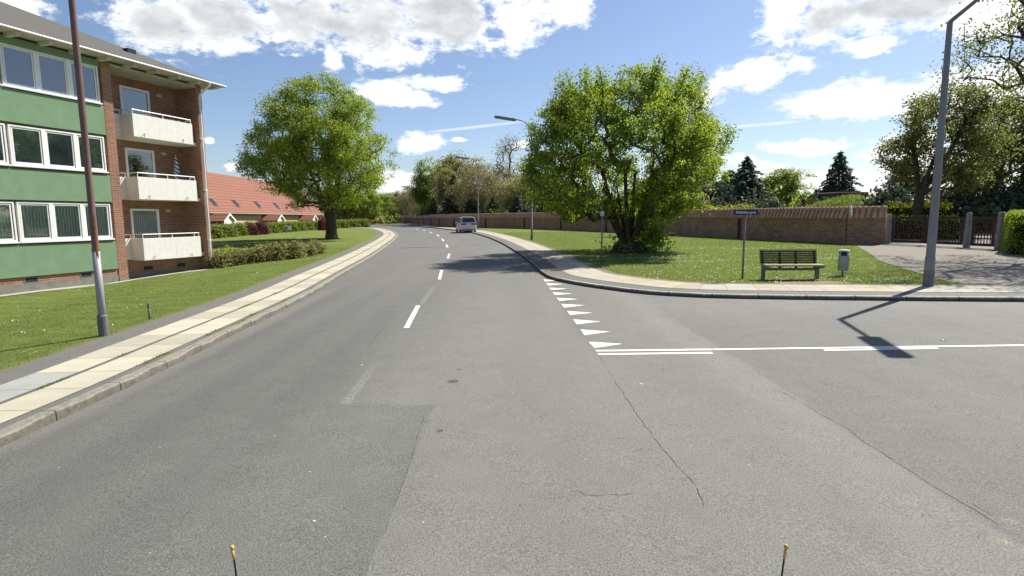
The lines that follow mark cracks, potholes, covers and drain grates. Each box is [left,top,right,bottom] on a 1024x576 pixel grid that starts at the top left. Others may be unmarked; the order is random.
crack [598,355,704,506]
